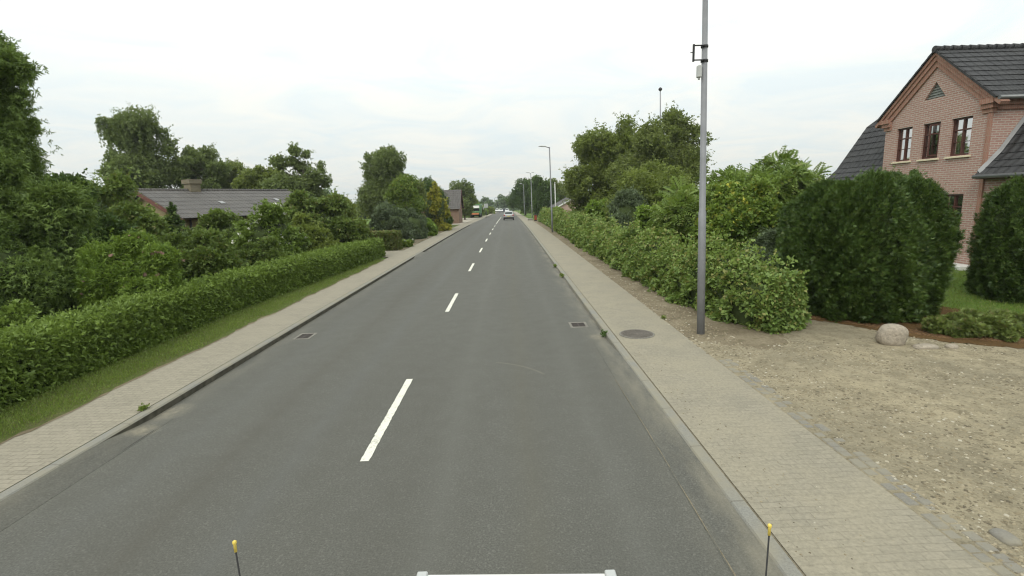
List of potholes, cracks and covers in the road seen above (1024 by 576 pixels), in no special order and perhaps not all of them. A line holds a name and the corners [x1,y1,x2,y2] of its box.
manhole cover [619,329,655,339]
